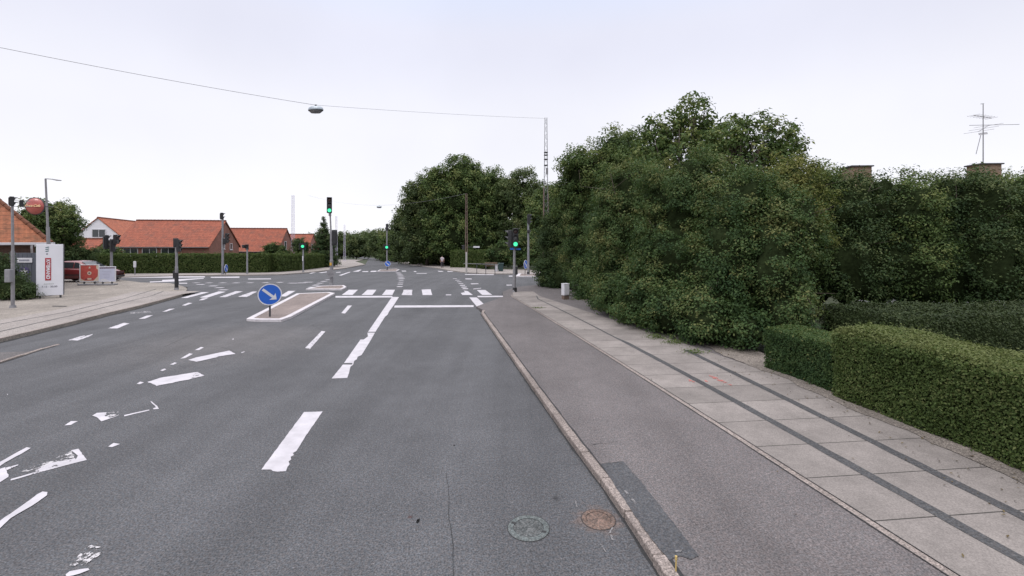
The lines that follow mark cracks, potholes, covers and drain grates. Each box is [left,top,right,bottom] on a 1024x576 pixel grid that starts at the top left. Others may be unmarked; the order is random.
manhole cover [507,515,550,542]
crack [446,471,454,576]
manhole cover [581,509,616,530]
